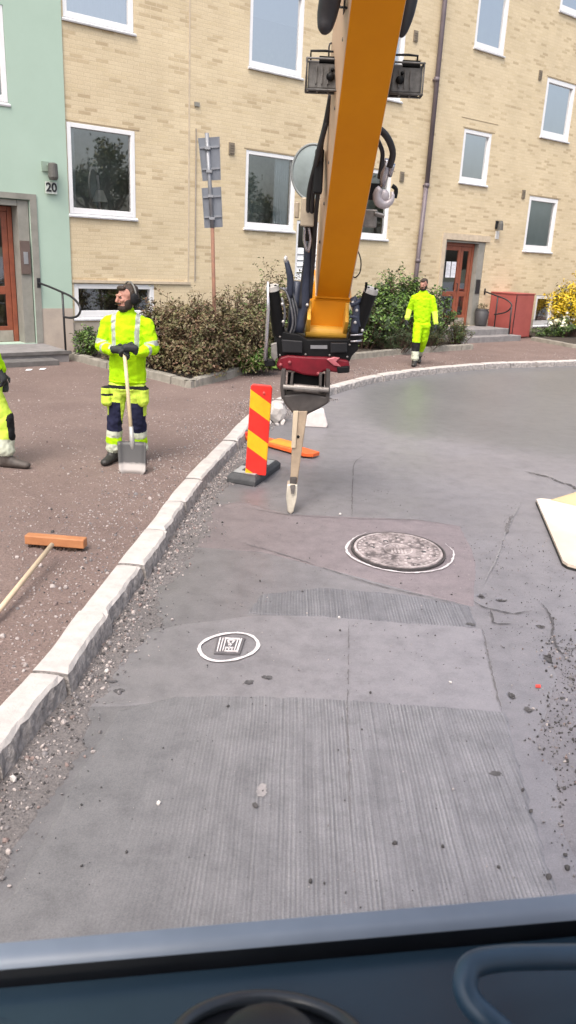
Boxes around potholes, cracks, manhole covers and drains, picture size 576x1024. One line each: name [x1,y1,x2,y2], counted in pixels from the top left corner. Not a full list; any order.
crack [474,601,576,657]
manhole cover [351,532,446,571]
utility cover [214,637,245,655]
